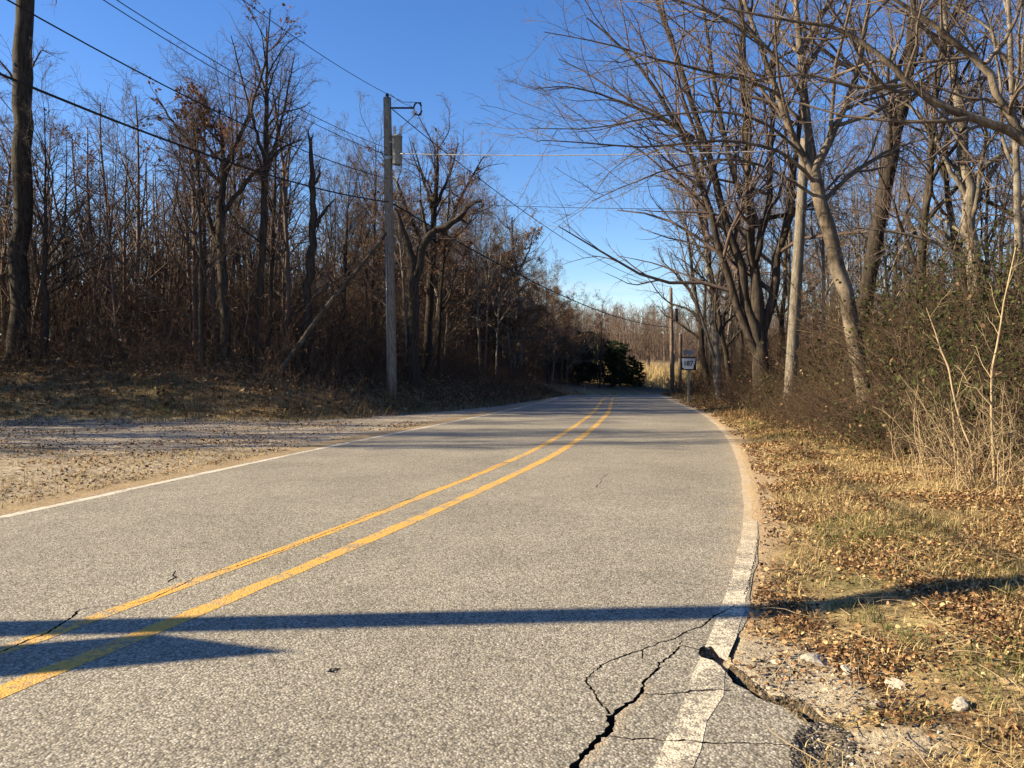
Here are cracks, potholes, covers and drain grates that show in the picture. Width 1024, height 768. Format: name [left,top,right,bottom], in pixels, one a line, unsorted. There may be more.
crack [569,606,790,768]
